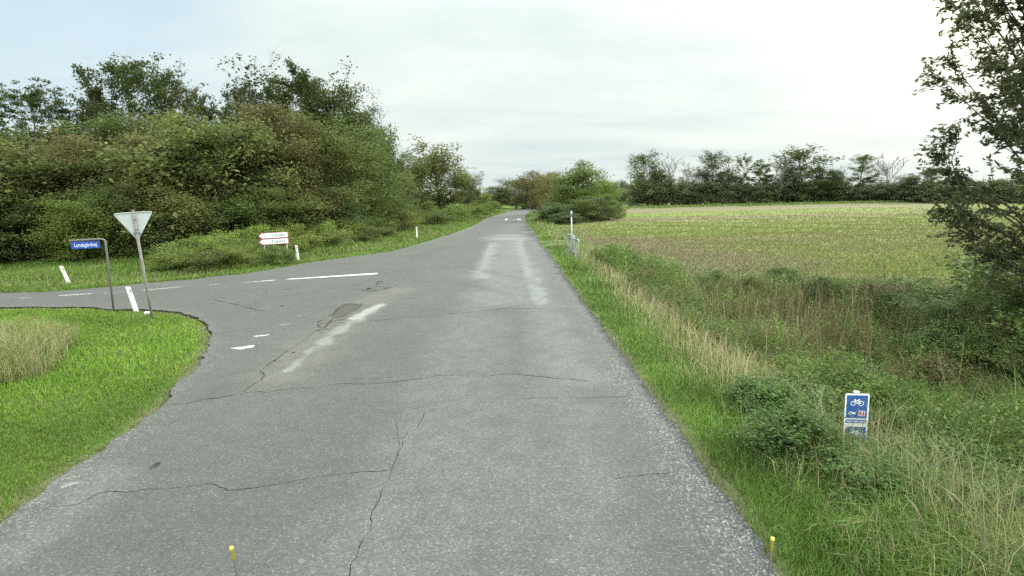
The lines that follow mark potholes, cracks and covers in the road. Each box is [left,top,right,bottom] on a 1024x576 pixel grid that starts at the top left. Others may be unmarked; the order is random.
crack [169,374,585,405]
crack [38,413,425,576]
